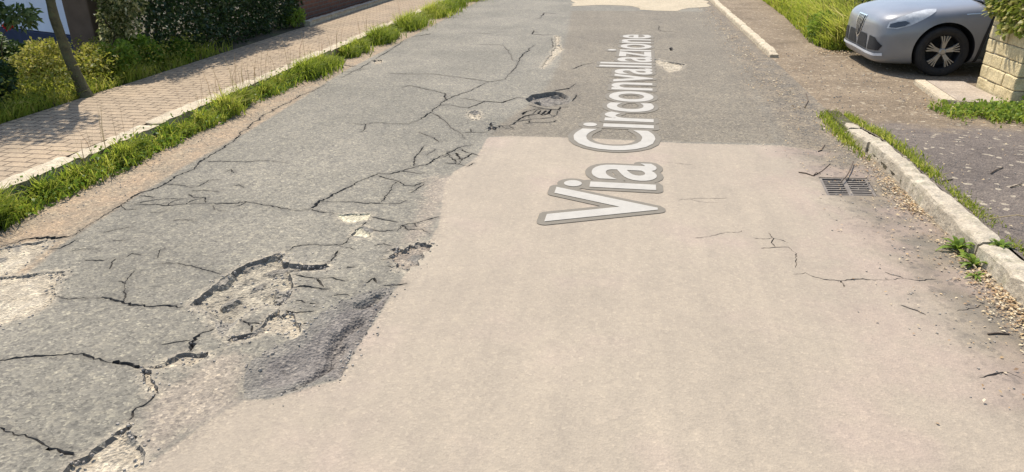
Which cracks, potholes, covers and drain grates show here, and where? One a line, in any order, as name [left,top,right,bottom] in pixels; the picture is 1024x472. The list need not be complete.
crack [0,353,140,369]
crack [129,395,155,420]
pothole [227,309,301,342]
crack [162,329,214,351]
pothole [389,242,433,272]
pothole [525,92,572,107]
drain grate [819,177,877,196]
pothole [189,252,330,336]
crack [701,231,935,287]
crack [1,227,180,308]
crack [0,427,75,456]
